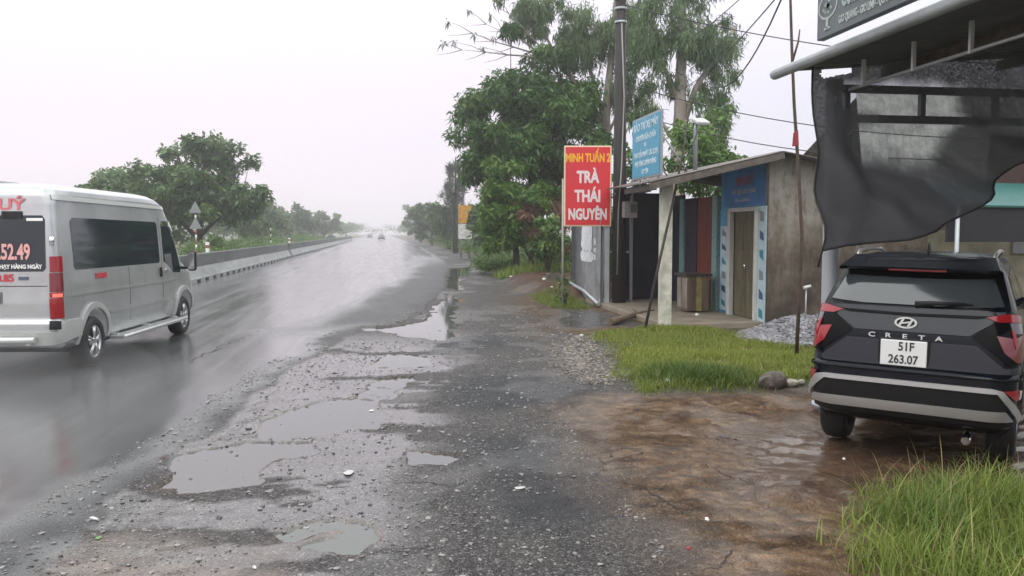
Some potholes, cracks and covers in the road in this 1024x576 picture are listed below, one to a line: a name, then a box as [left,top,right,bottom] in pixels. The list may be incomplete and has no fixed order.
pothole [357,353,436,371]
pothole [402,446,464,466]
pothole [349,293,468,341]
pothole [268,514,390,557]
pothole [148,439,328,496]
pothole [253,396,398,441]
crack [595,445,705,516]
